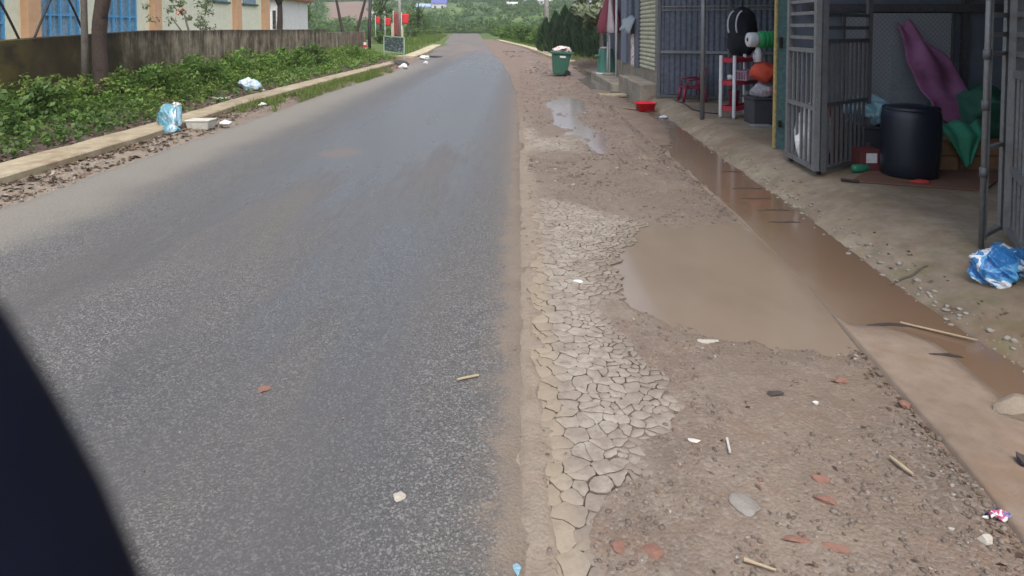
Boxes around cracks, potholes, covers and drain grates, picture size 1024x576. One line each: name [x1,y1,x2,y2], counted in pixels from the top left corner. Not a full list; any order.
crack [530,199,681,576]
